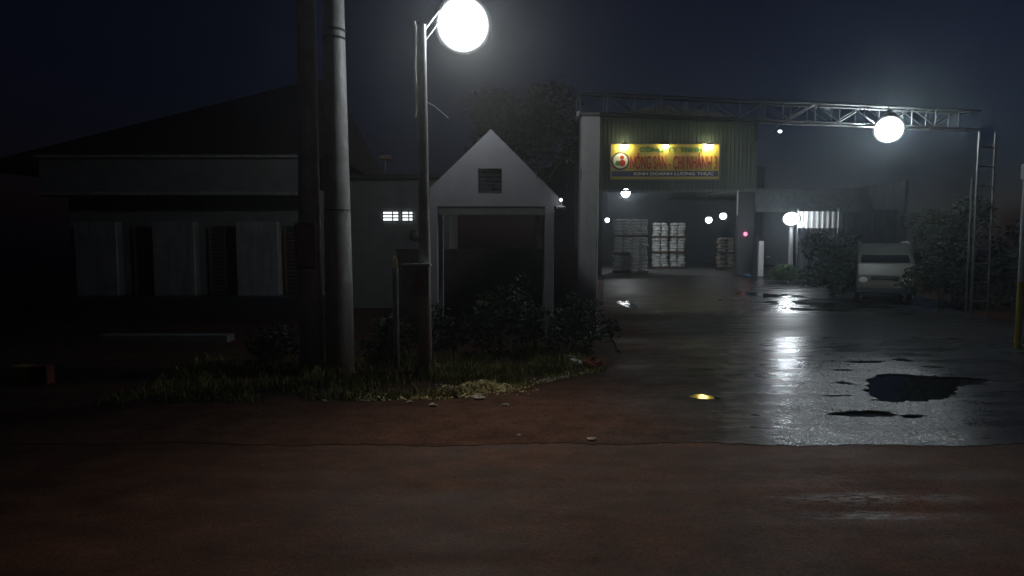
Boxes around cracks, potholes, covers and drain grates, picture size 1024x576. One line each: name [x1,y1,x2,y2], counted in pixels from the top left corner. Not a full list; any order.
pothole [862,373,991,403]
